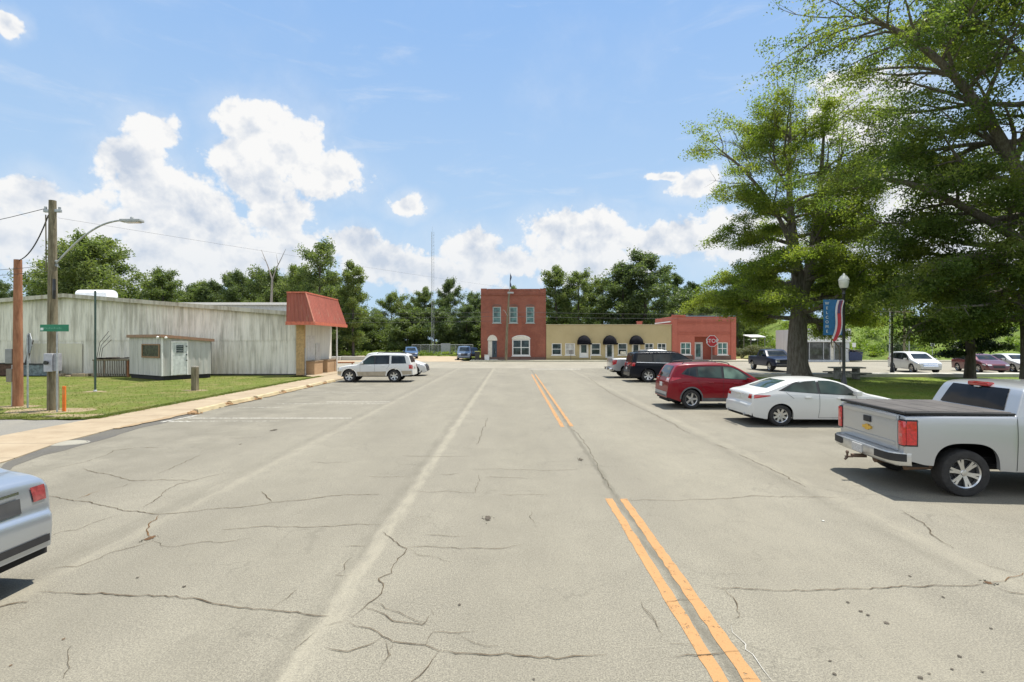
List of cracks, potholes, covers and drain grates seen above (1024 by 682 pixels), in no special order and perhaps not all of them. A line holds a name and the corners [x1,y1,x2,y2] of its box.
crack [642,562,1024,657]
crack [0,447,607,682]
